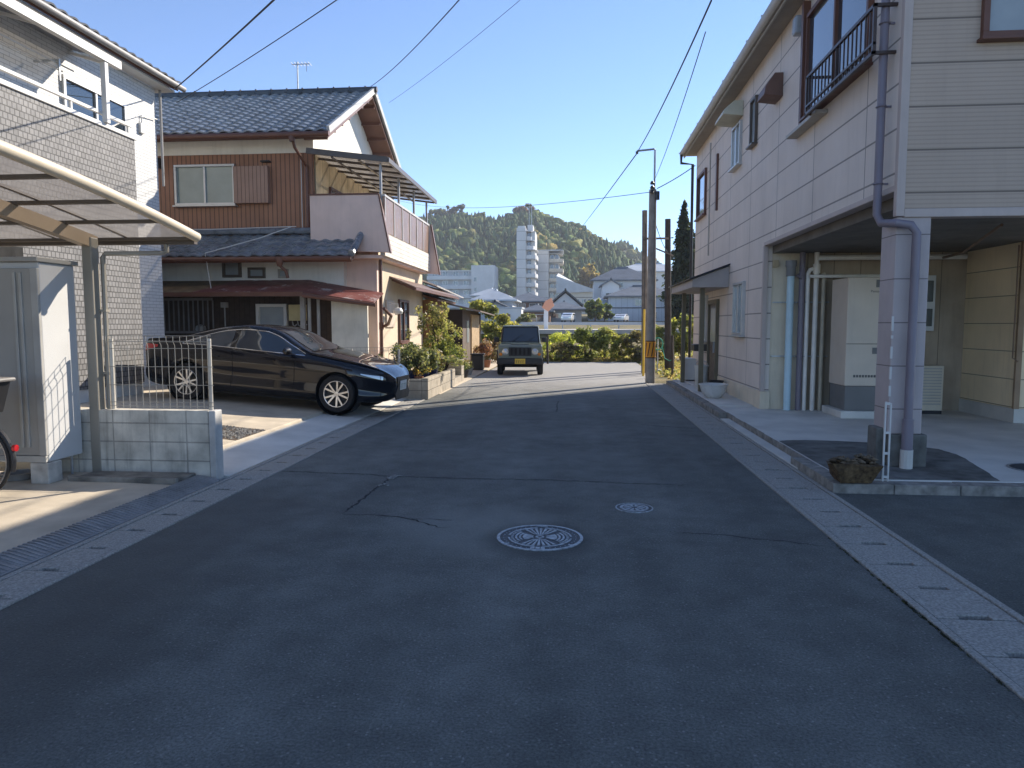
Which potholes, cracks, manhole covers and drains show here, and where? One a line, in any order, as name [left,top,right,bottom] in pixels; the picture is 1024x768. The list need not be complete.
crack [667,531,833,548]
crack [281,471,682,528]
manhole cover [497,525,583,551]
manhole cover [615,503,653,513]
